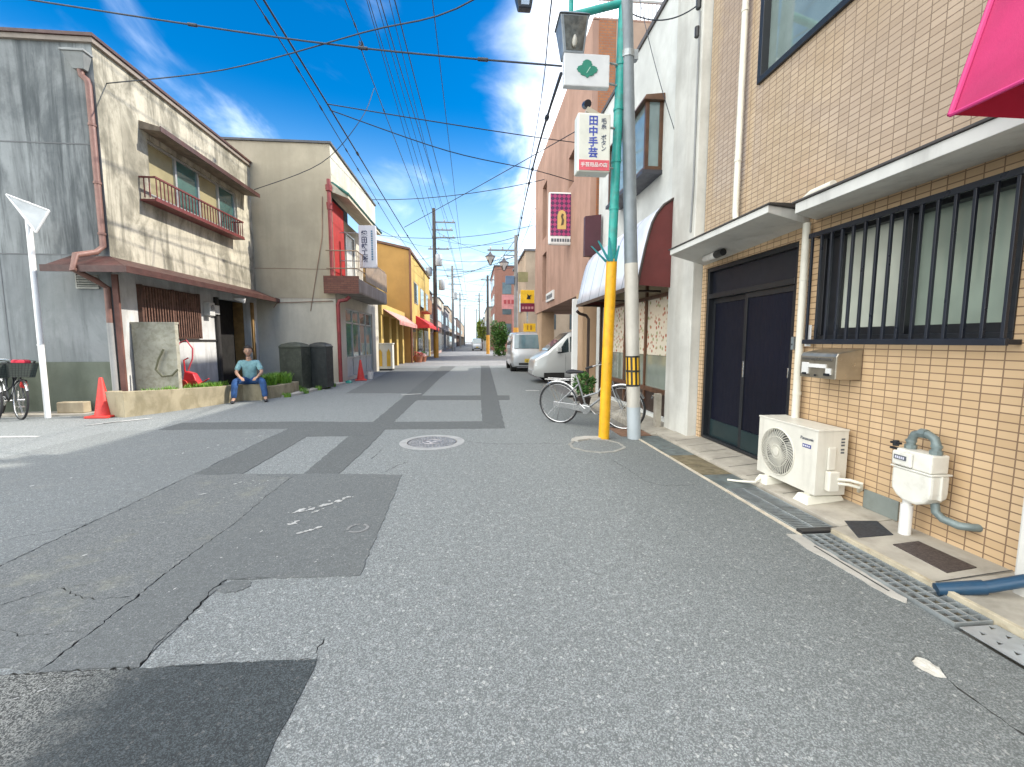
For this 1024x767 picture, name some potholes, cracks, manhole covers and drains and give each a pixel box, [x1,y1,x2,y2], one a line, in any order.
crack [950,681,1024,735]
manhole cover [399,435,465,450]
crack [0,479,324,678]
drain grate [802,533,993,631]
